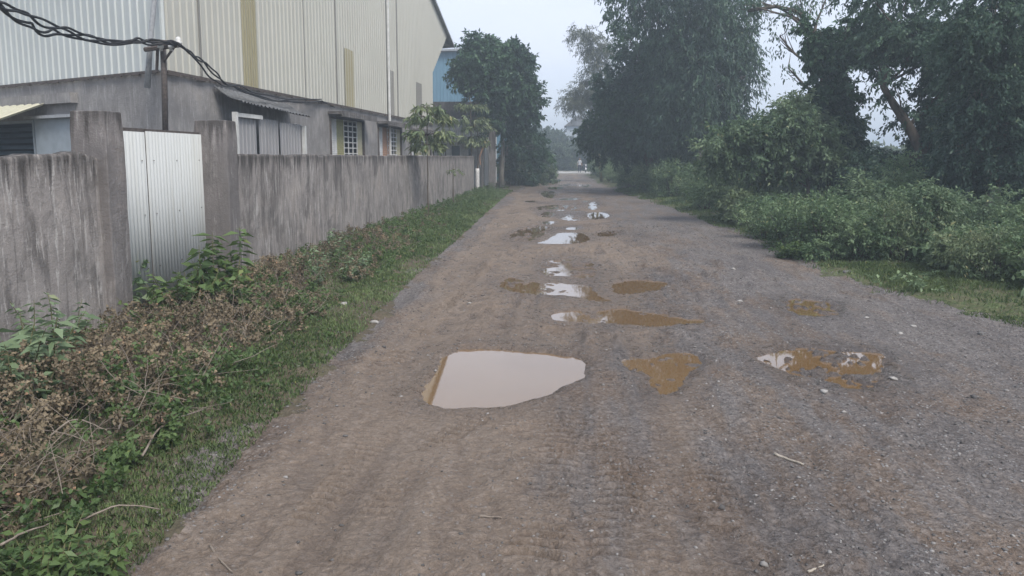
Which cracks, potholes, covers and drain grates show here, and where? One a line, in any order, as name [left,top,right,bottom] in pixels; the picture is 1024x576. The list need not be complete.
pothole [774,294,845,317]
pothole [537,258,601,278]
pothole [494,274,619,302]
pothole [746,342,896,389]
pothole [608,277,673,294]
pothole [611,346,711,395]
pothole [545,305,713,327]
pothole [530,231,594,244]
pothole [414,342,599,409]
pothole [557,210,588,221]
